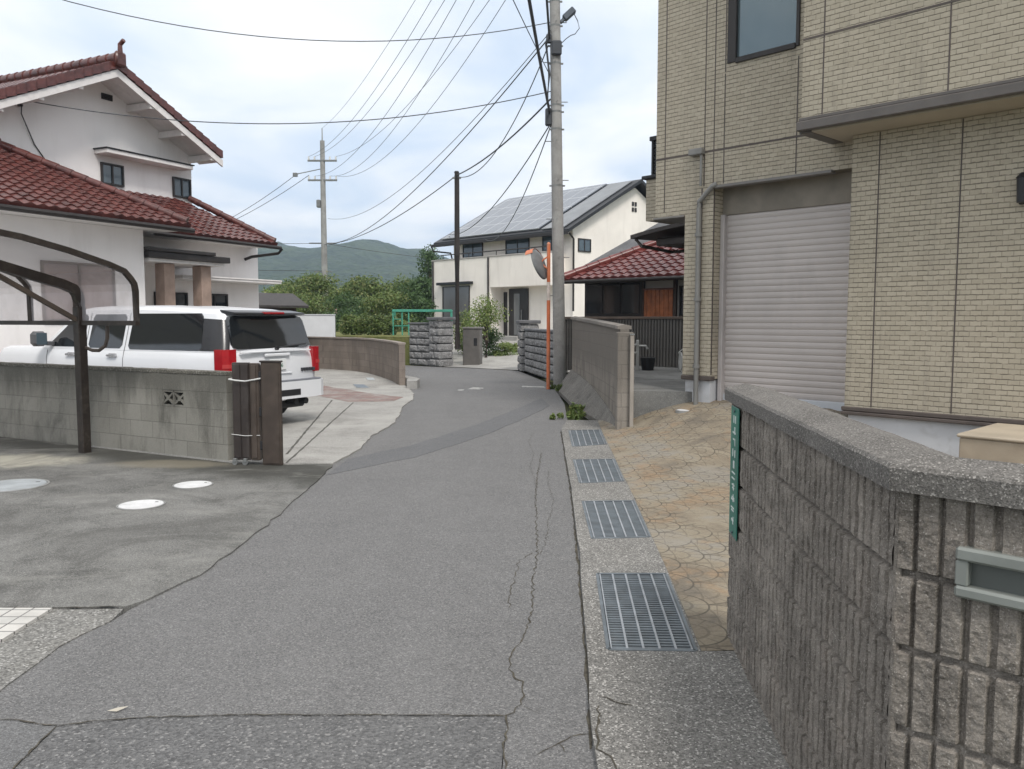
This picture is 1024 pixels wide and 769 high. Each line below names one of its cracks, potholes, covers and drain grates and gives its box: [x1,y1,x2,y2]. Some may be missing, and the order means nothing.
drain grate [582,500,651,539]
crack [502,435,553,769]
drain grate [568,429,607,447]
manhole cover [0,478,50,492]
drain grate [573,459,624,483]
manhole cover [116,499,166,510]
crack [538,695,631,769]
drain grate [596,573,698,652]
manhole cover [172,481,214,489]
